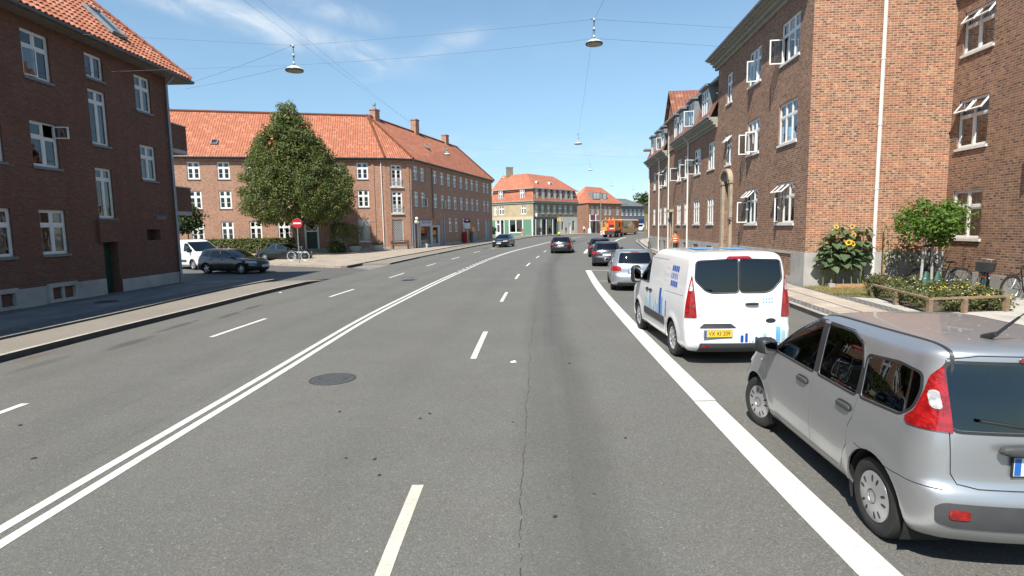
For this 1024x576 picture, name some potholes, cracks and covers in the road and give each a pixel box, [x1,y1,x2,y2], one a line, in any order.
manhole cover [309,373,356,385]
crack [518,308,535,576]
